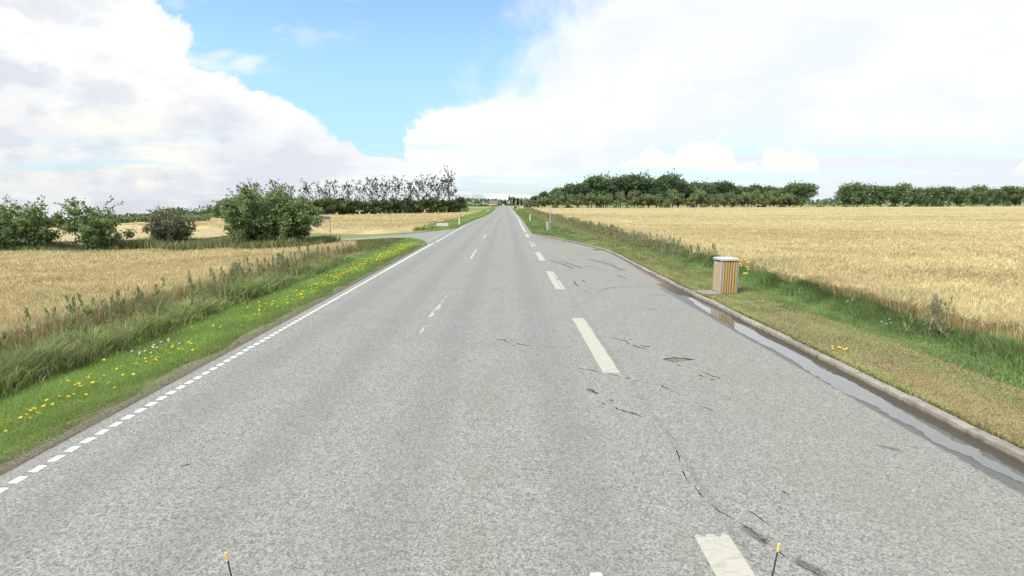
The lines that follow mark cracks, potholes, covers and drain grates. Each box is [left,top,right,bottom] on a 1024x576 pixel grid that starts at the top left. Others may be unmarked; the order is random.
crack [578,368,681,417]
